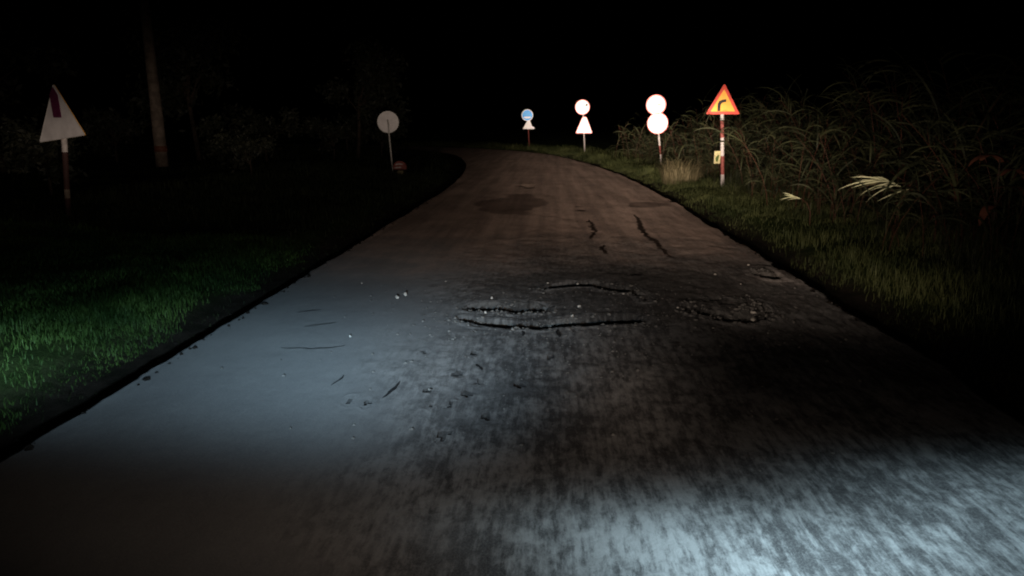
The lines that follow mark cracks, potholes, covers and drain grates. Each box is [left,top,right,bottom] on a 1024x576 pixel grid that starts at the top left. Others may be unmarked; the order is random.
pothole [454,298,558,317]
pothole [670,296,784,328]
crack [633,215,676,259]
pothole [533,278,658,304]
crack [575,206,608,254]
pothole [447,310,655,333]
pothole [742,265,795,282]
